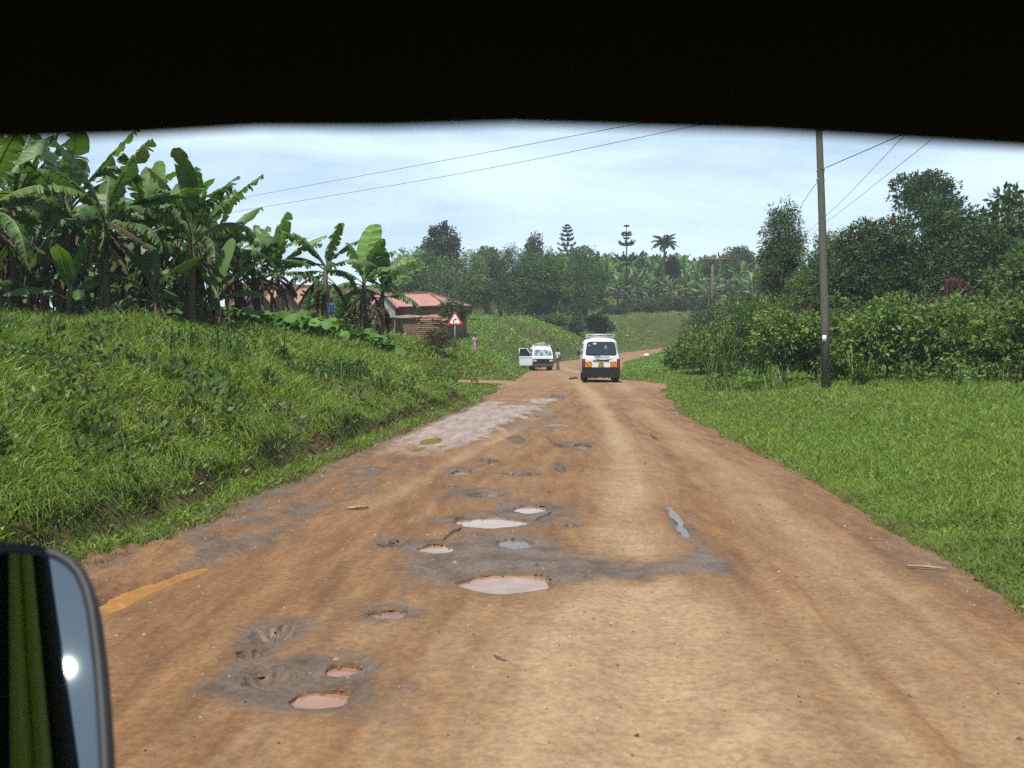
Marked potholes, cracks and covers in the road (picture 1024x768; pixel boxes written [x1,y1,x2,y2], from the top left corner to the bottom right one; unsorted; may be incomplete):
pothole [412,541,455,554]
pothole [512,503,551,514]
pothole [324,658,369,677]
pothole [491,536,536,549]
pothole [285,681,361,709]
pothole [505,434,528,444]
pothole [246,619,303,647]
pothole [445,568,559,594]
pothole [377,537,411,548]
pothole [450,515,535,529]
pothole [367,606,414,619]
pothole [451,467,473,475]
